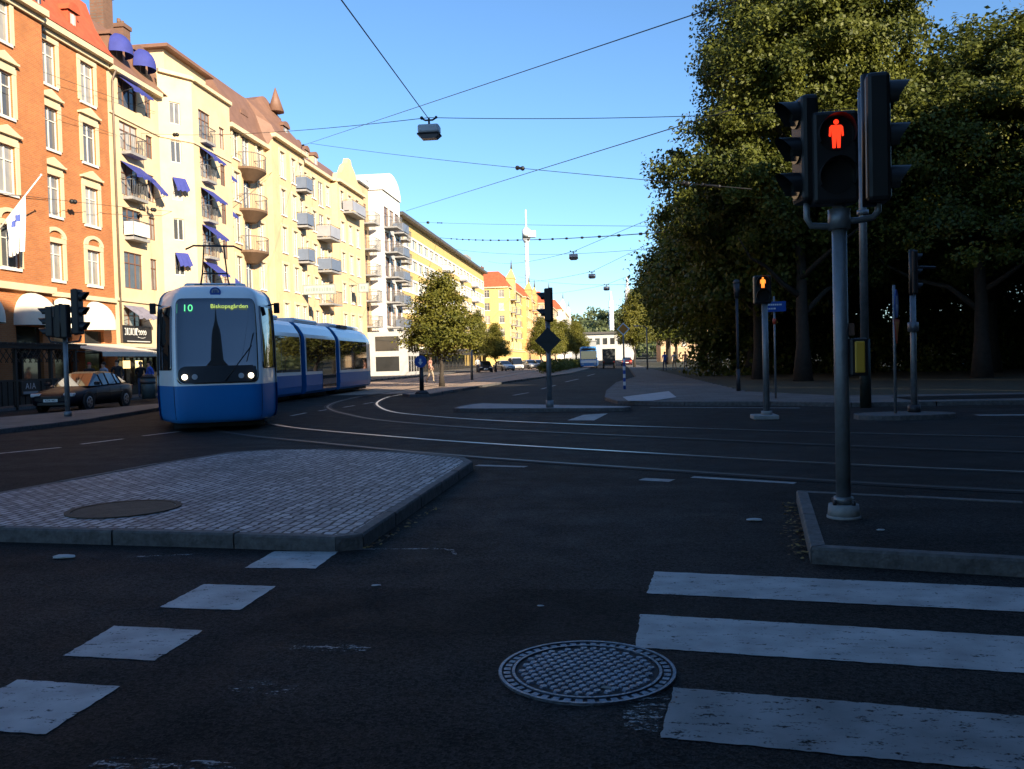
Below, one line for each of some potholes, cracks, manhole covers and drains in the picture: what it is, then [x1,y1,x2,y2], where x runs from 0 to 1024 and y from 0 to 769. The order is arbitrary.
manhole cover [64,499,182,519]
manhole cover [498,640,677,706]
